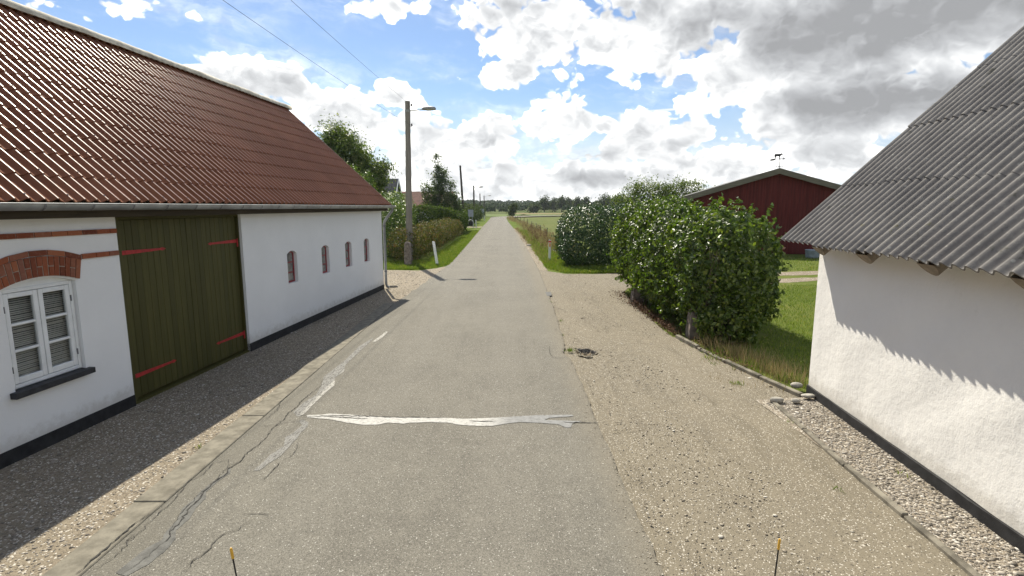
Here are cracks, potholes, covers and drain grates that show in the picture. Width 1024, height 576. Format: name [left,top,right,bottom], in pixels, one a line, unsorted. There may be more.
crack [102,332,597,576]
pothole [574,348,598,358]
